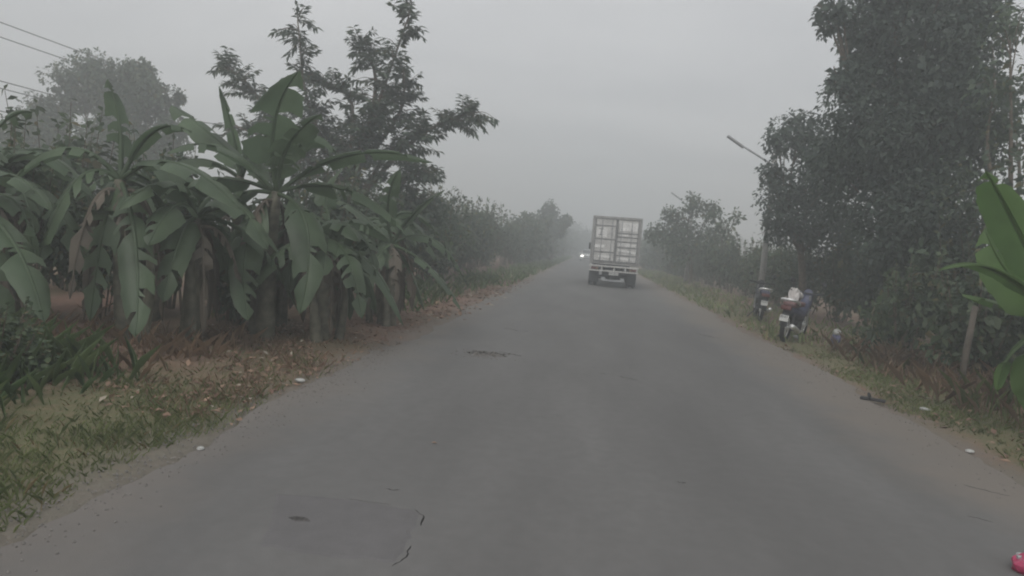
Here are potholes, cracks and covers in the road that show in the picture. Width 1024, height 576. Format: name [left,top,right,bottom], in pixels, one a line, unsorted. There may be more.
crack [347,488,425,566]
